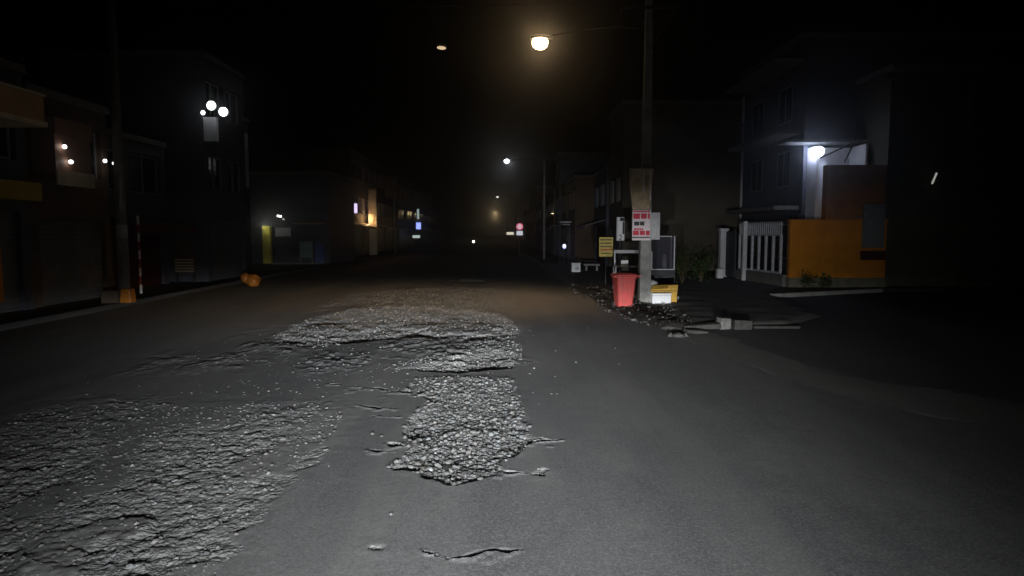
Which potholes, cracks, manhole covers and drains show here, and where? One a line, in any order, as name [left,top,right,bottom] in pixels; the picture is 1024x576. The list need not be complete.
pothole [0,399,342,576]
pothole [383,375,562,486]
pothole [275,304,523,347]
pothole [384,340,523,373]
crack [421,547,522,560]
